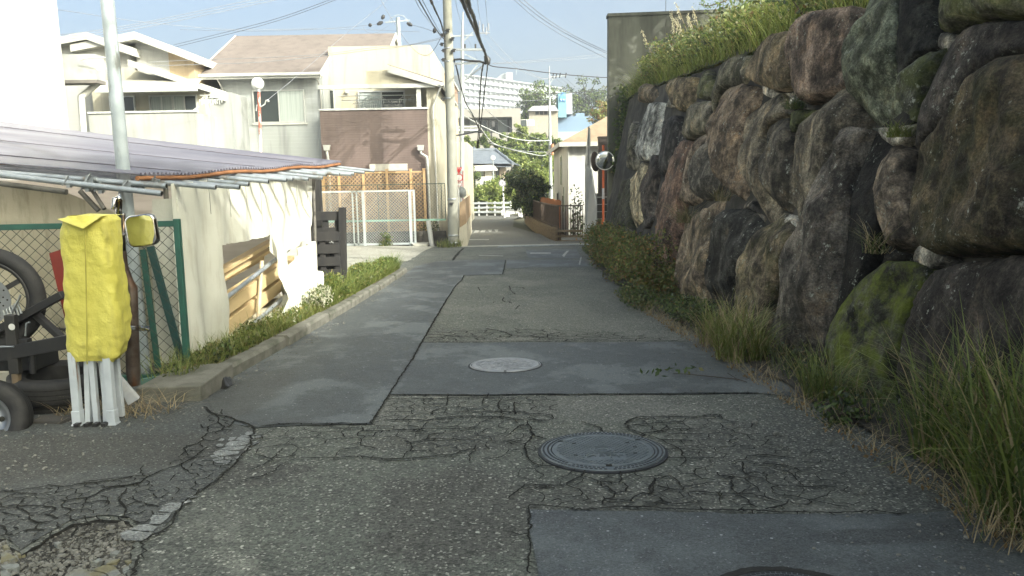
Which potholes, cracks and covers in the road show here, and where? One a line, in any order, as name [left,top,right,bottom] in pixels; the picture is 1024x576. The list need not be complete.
manhole cover [468,357,543,373]
crack [429,328,682,342]
crack [245,393,861,535]
manhole cover [538,432,668,474]
crack [0,410,235,551]
